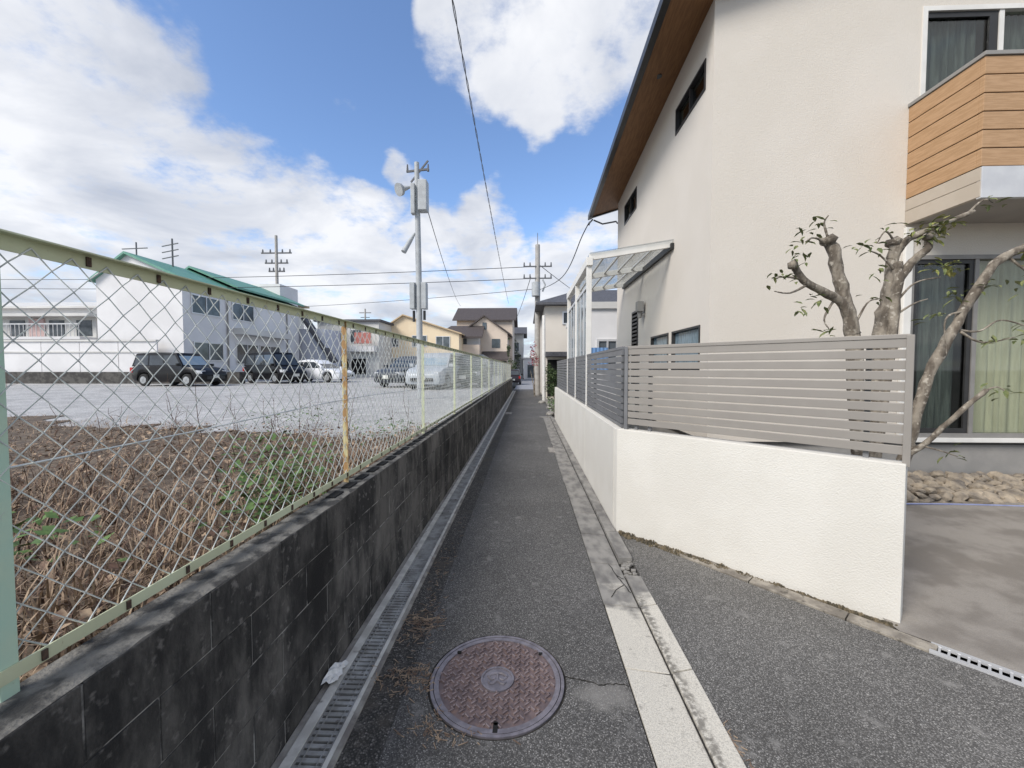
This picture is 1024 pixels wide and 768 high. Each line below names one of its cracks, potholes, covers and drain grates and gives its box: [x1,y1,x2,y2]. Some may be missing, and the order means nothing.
crack [563,676,629,687]
manhole cover [428,635,566,741]
drain grate [929,641,1024,687]
